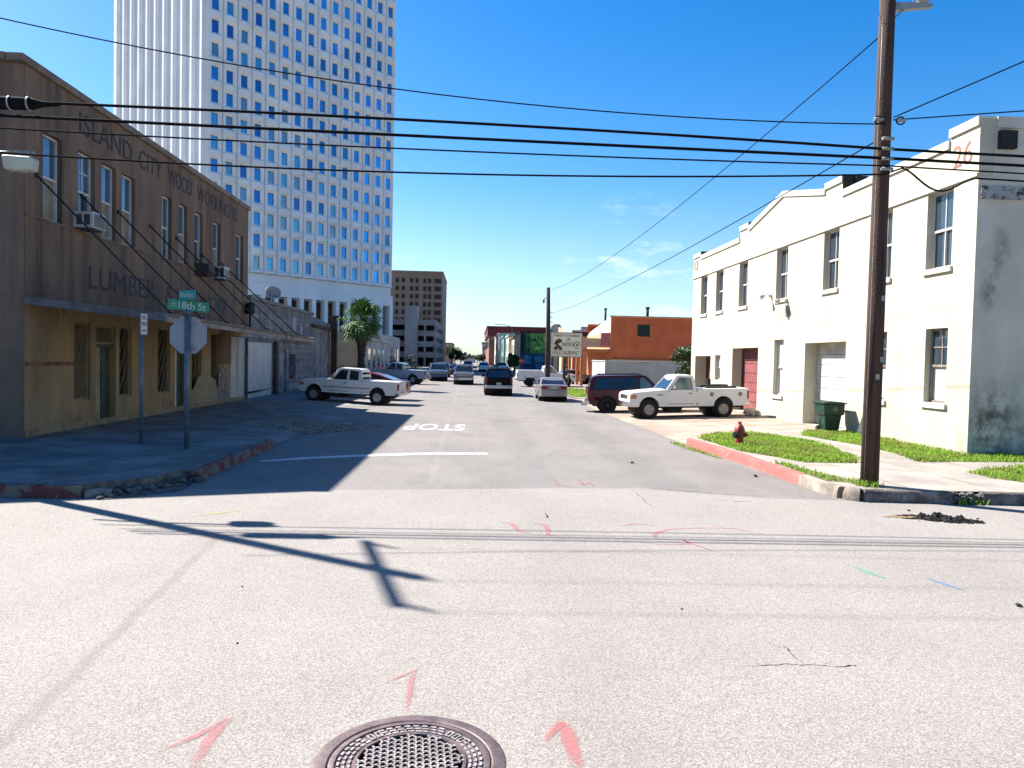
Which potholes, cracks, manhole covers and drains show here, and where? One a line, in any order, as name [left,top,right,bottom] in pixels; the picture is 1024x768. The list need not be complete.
pothole [885,512,985,524]
crack [756,646,857,667]
manhole cover [311,715,506,768]
